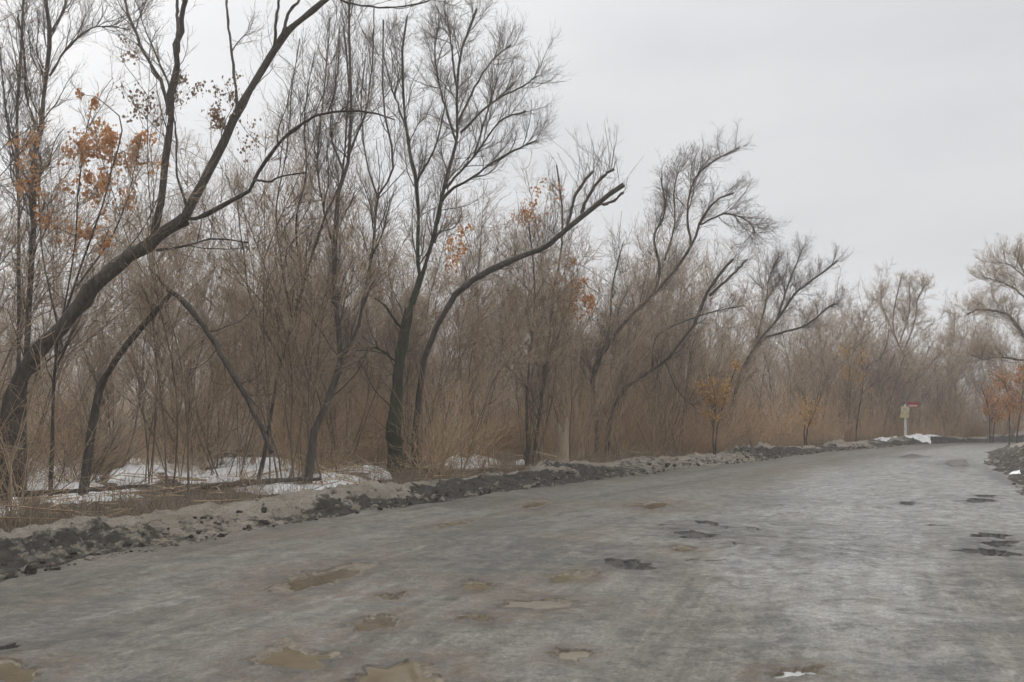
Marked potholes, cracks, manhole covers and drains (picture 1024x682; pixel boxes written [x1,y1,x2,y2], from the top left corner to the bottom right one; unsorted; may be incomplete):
pothole [533,567,612,584]
pothole [328,655,460,682]
pothole [664,529,731,541]
pothole [956,531,1024,541]
pothole [450,576,509,593]
pothole [934,546,1024,560]
